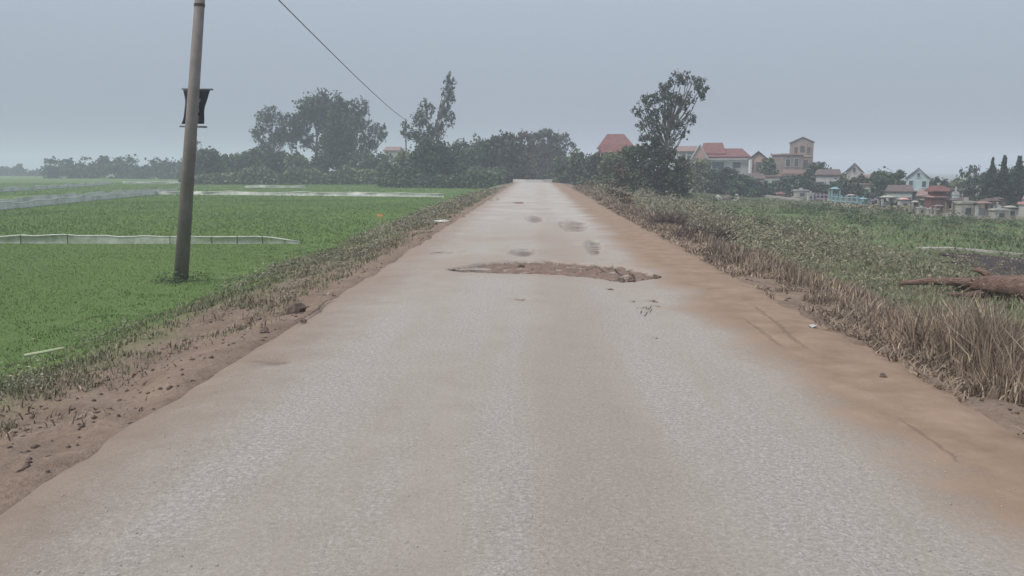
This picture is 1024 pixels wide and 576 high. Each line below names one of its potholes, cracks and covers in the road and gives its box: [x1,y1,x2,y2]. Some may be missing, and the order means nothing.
pothole [457,262,653,283]
